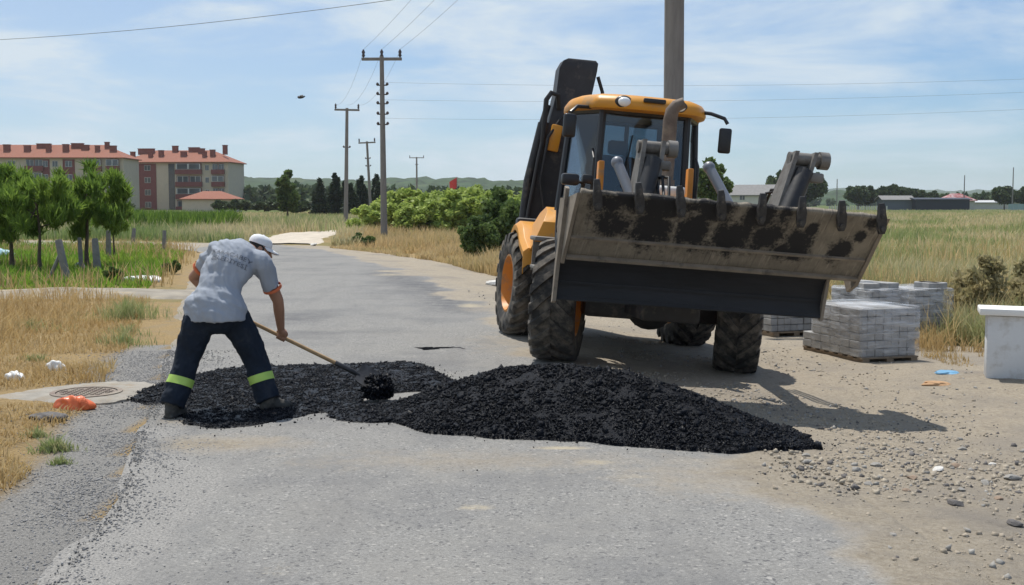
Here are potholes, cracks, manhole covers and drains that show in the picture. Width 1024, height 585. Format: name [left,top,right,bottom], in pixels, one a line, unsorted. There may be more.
manhole cover [49,386,123,398]
